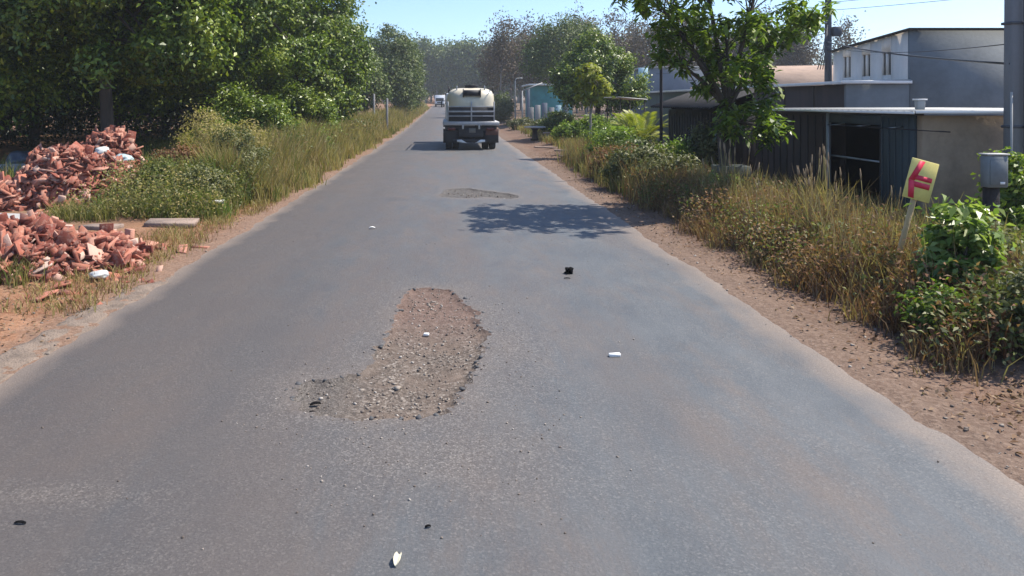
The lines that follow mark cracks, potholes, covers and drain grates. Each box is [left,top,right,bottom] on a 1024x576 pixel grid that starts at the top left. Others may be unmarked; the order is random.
pothole [284,287,493,422]
pothole [439,188,519,199]
